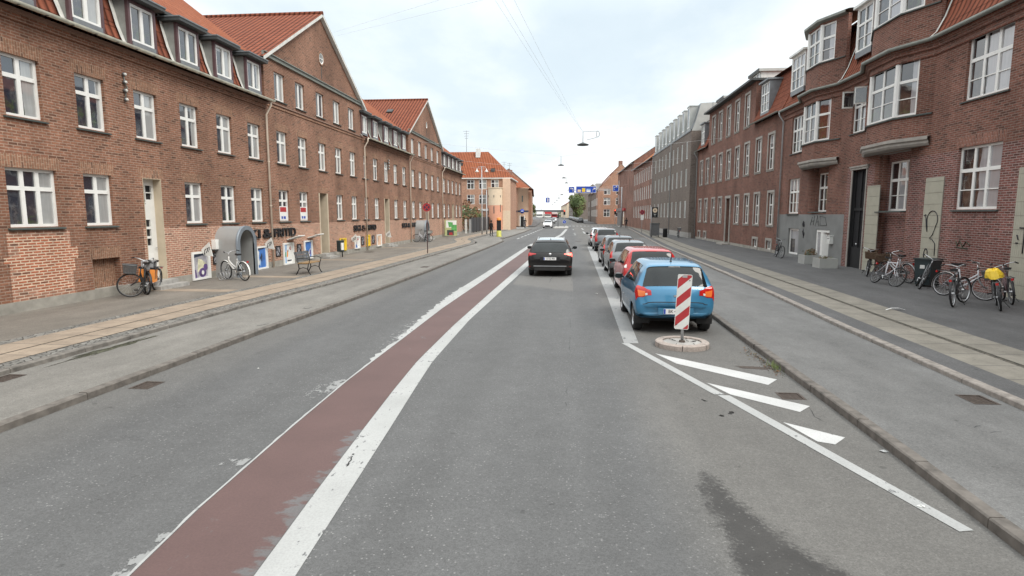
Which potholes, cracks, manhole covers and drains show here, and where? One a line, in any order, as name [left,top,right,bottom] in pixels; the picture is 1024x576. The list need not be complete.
drain grate [954,394,1001,405]
drain grate [775,392,807,400]
drain grate [128,381,163,389]
drain grate [0,374,27,382]
